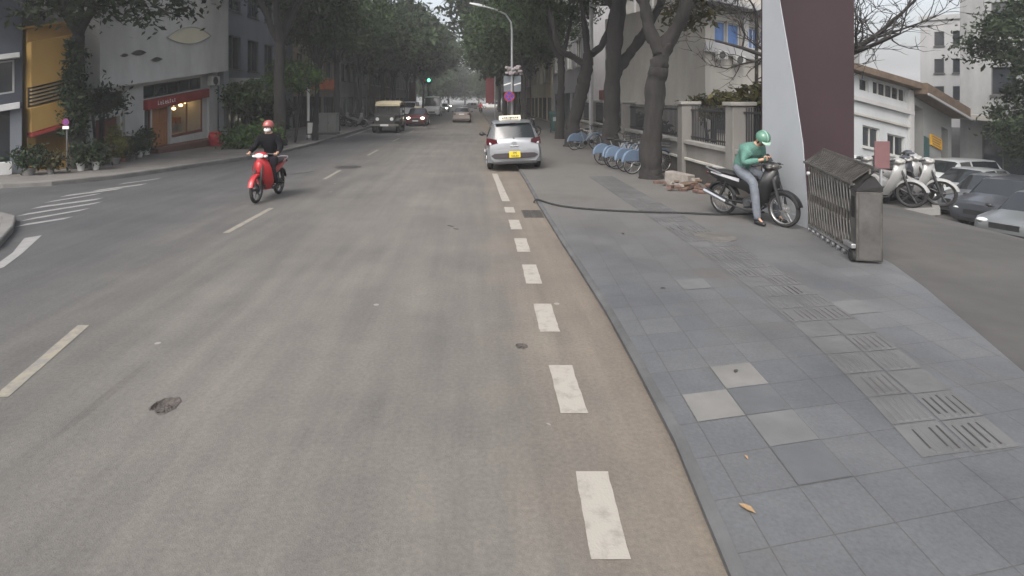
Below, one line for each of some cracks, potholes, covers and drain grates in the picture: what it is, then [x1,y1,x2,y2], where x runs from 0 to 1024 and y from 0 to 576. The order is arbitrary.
drain grate [521,210,545,218]
pothole [149,397,182,415]
